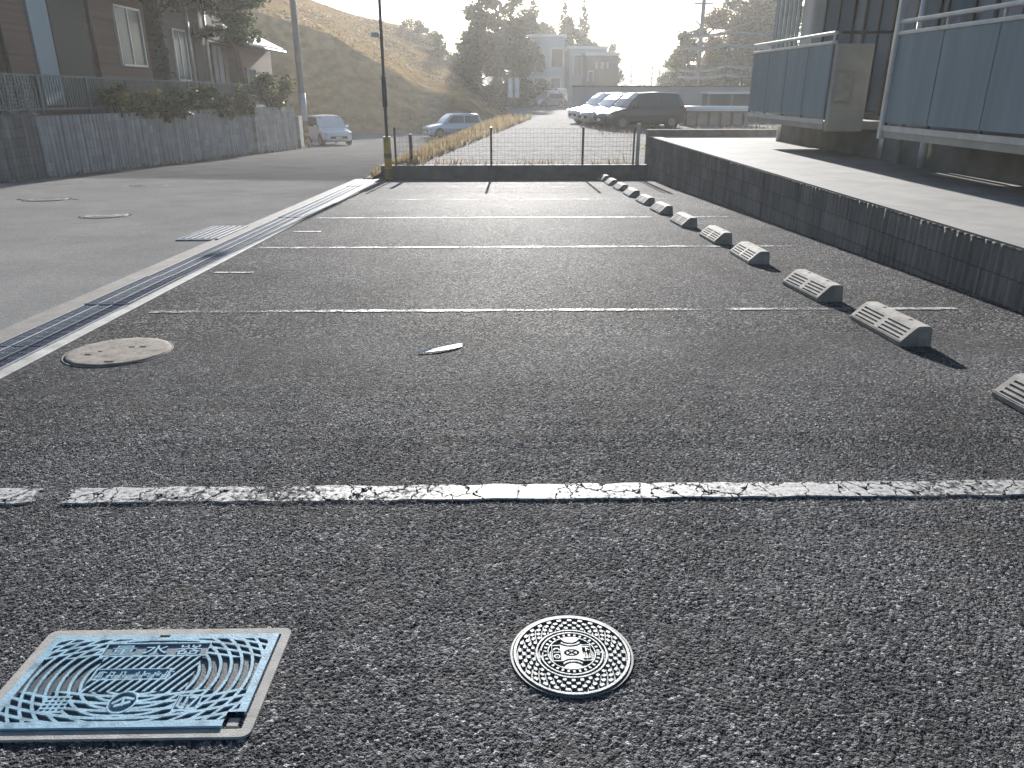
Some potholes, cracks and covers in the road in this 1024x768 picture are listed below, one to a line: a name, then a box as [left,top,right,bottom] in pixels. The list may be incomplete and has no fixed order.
drain grate [176,226,248,241]
manhole cover [510,615,634,700]
manhole cover [61,338,174,368]
